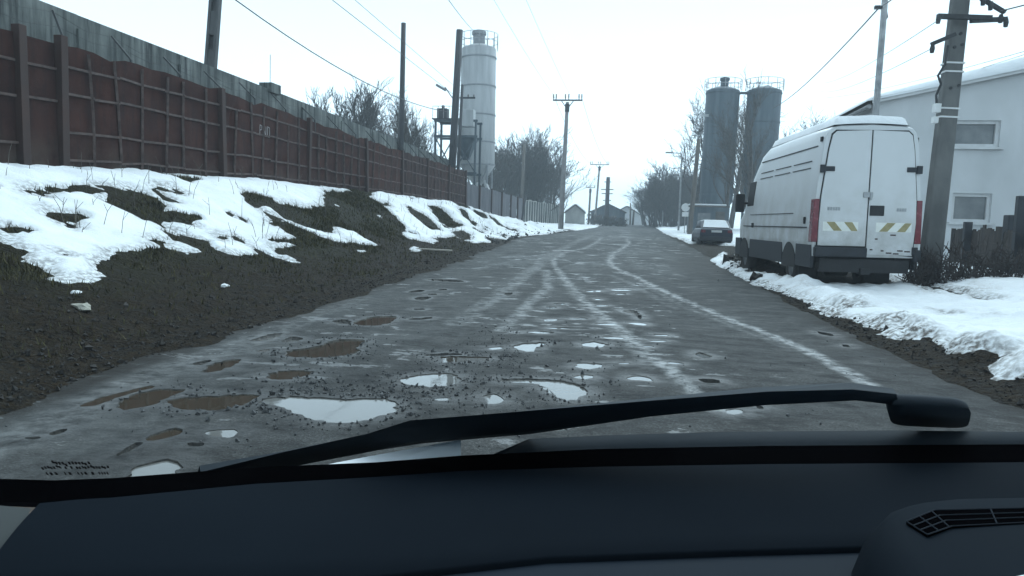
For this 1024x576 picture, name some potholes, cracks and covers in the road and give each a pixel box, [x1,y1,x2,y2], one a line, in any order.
pothole [496,378,588,401]
pothole [145,428,183,441]
pothole [116,389,185,410]
pothole [266,370,314,380]
pothole [204,429,238,438]
pothole [166,394,261,411]
pothole [353,316,397,326]
pothole [258,395,399,423]
pothole [399,373,462,387]
pothole [514,342,546,352]
pothole [284,339,365,358]
pothole [201,359,241,372]
